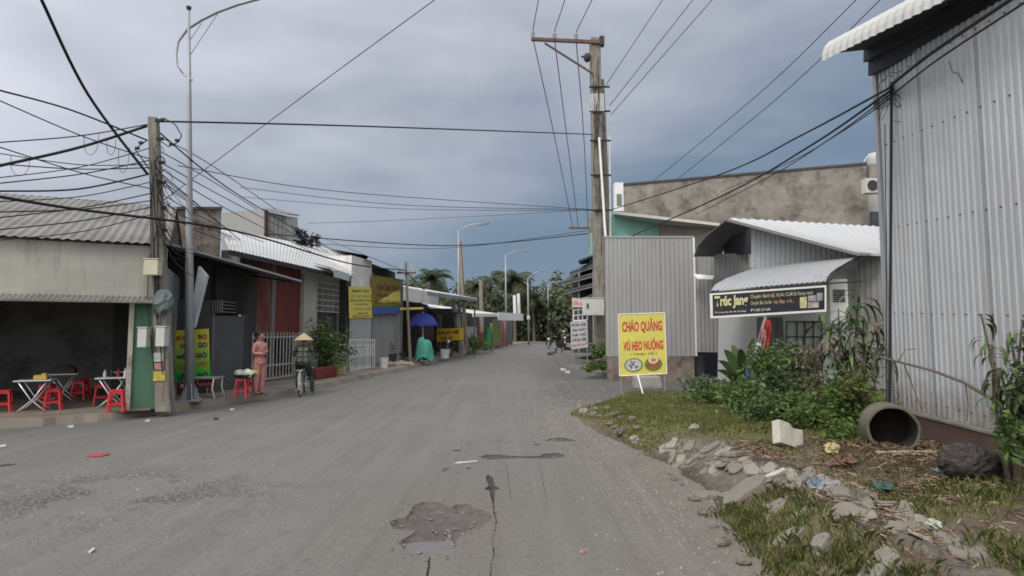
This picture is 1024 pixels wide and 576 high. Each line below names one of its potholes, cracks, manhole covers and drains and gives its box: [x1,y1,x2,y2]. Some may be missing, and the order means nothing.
pothole [380,497,498,562]
crack [485,463,511,576]
